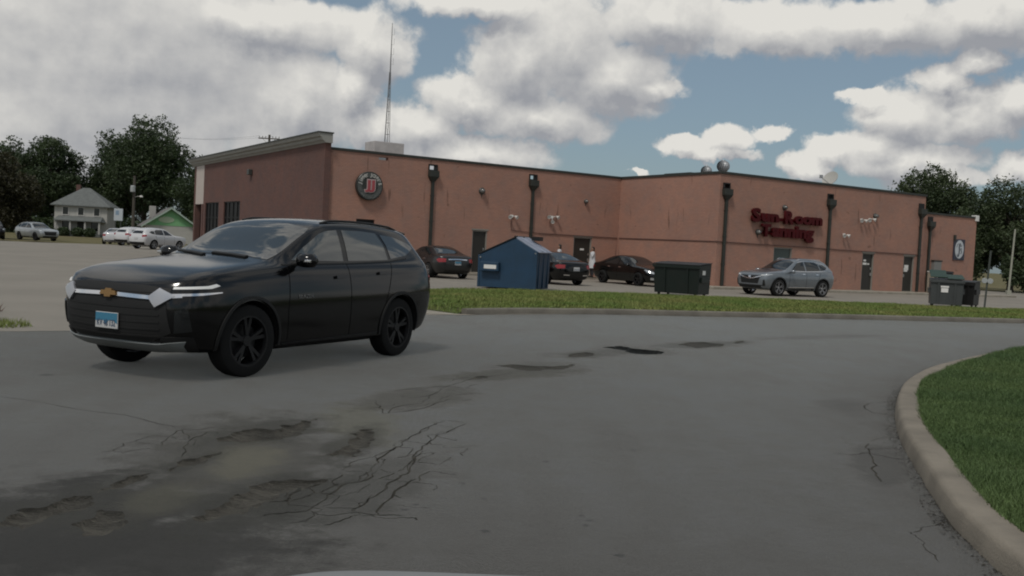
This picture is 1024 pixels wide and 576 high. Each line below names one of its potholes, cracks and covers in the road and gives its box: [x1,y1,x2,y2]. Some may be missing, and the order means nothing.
crack [910,521,947,562]
pothole [603,346,664,355]
pothole [192,479,329,522]
pothole [327,429,375,457]
pothole [0,496,95,530]
crack [264,376,490,526]
pothole [71,510,128,537]
crack [6,397,213,457]
pothole [216,419,317,443]
crack [849,437,909,482]
